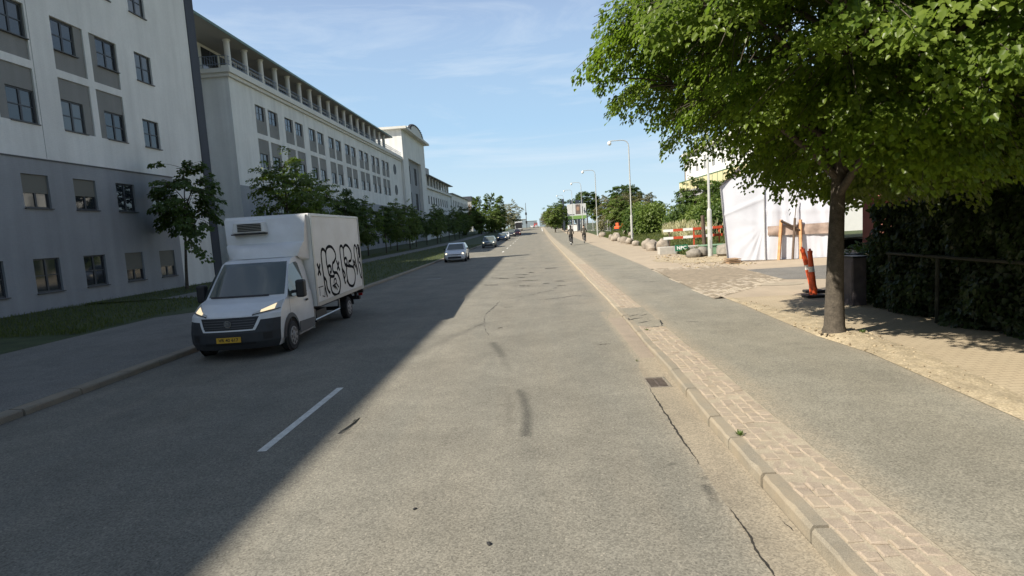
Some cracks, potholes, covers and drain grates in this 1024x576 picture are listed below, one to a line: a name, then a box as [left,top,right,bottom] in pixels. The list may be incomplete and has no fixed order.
crack [730,509,793,576]
drain grate [643,376,672,388]
crack [650,389,698,462]
